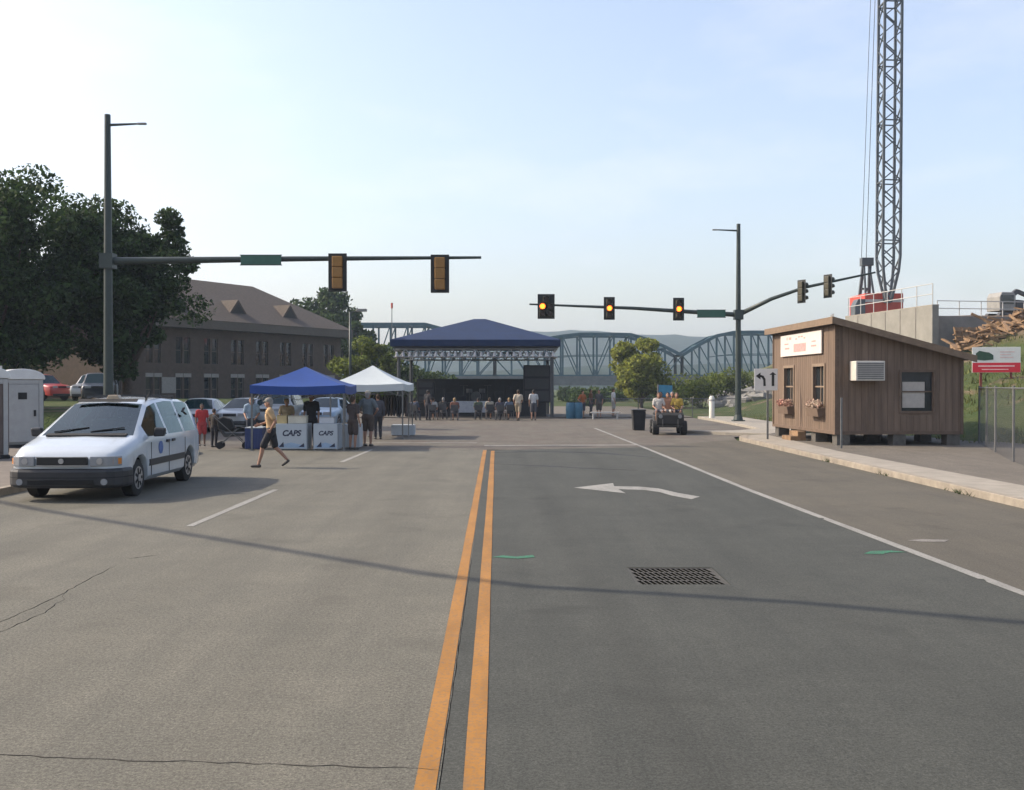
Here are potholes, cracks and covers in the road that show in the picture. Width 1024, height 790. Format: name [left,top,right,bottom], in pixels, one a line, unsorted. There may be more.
crack [0,559,472,790]
drain grate [627,568,729,584]
